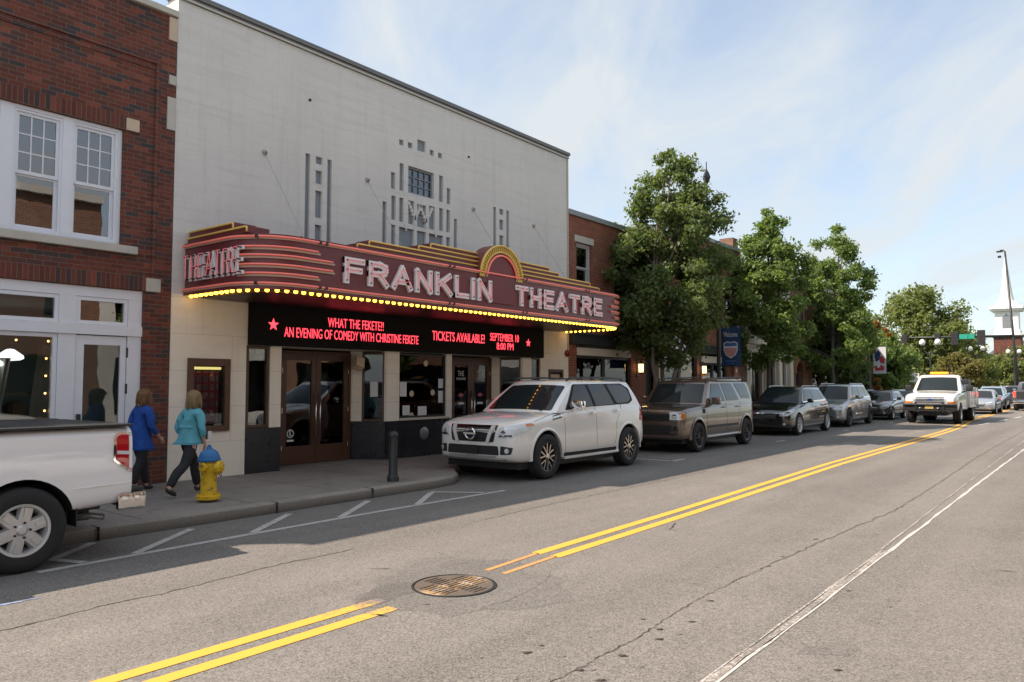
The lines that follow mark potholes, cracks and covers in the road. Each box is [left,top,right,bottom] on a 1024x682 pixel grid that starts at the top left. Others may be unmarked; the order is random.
manhole cover [411,574,497,597]
